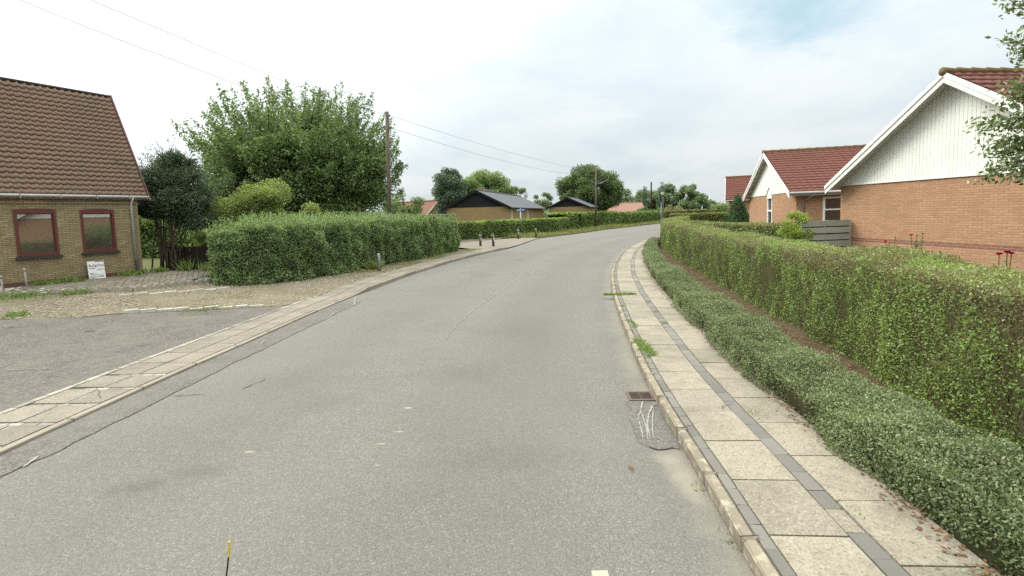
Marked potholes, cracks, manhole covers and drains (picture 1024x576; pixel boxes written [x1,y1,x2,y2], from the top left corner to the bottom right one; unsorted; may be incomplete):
drain grate [625,391,656,401]
